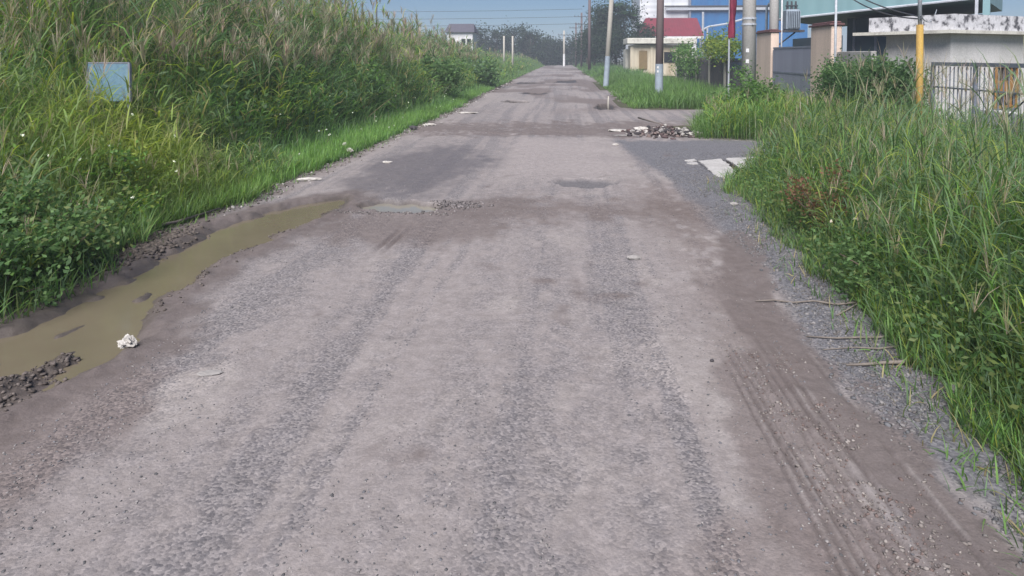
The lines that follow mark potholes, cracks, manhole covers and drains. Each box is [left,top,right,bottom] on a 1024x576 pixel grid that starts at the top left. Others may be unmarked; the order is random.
pothole [350,199,442,214]
